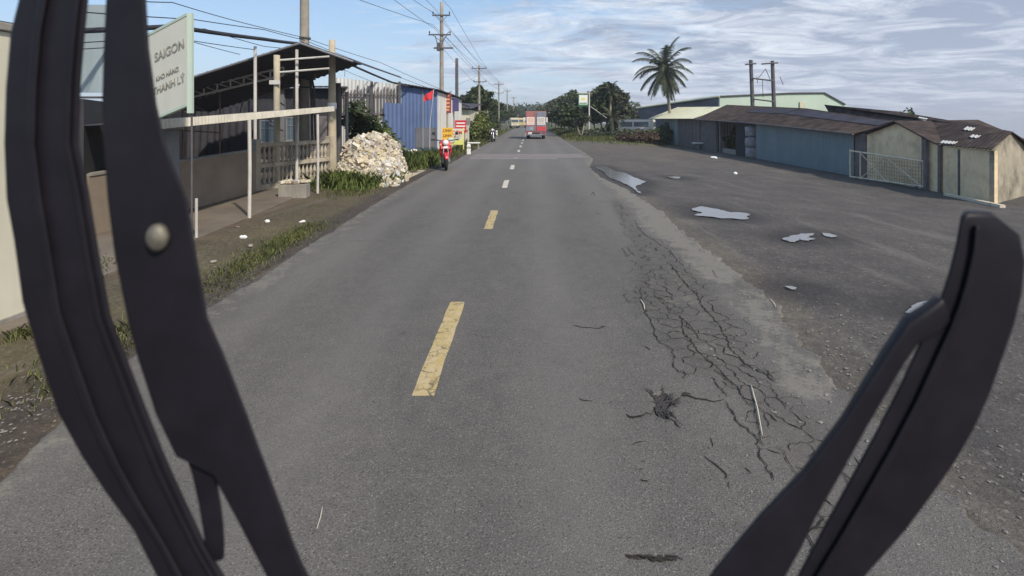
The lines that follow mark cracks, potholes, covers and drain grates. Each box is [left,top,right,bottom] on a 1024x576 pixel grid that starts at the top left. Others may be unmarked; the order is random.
crack [580,199,859,552]
